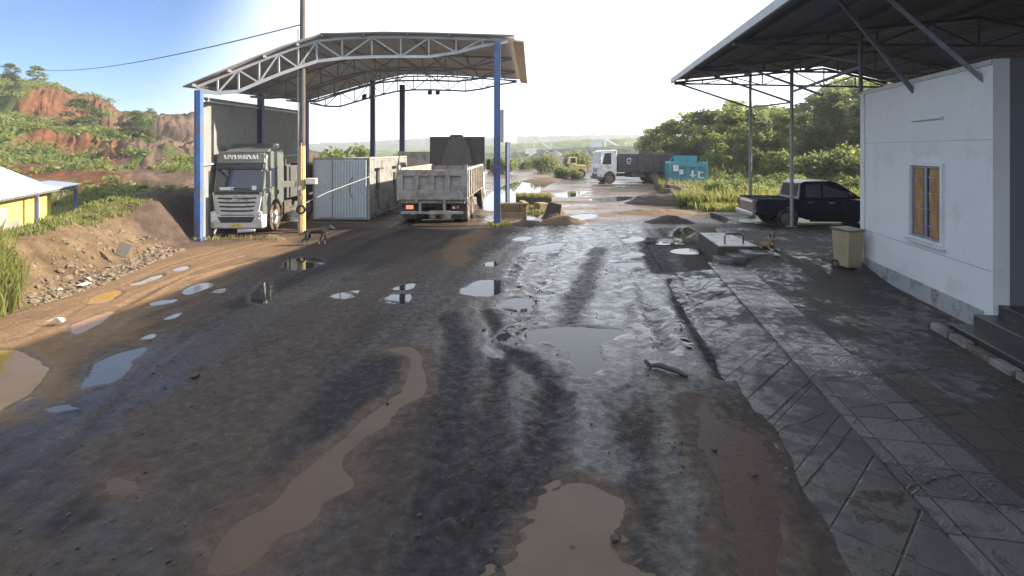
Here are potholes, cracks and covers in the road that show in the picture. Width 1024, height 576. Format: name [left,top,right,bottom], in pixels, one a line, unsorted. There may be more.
pothole [512,322,637,384]
pothole [66,343,160,394]
pothole [470,468,663,576]
